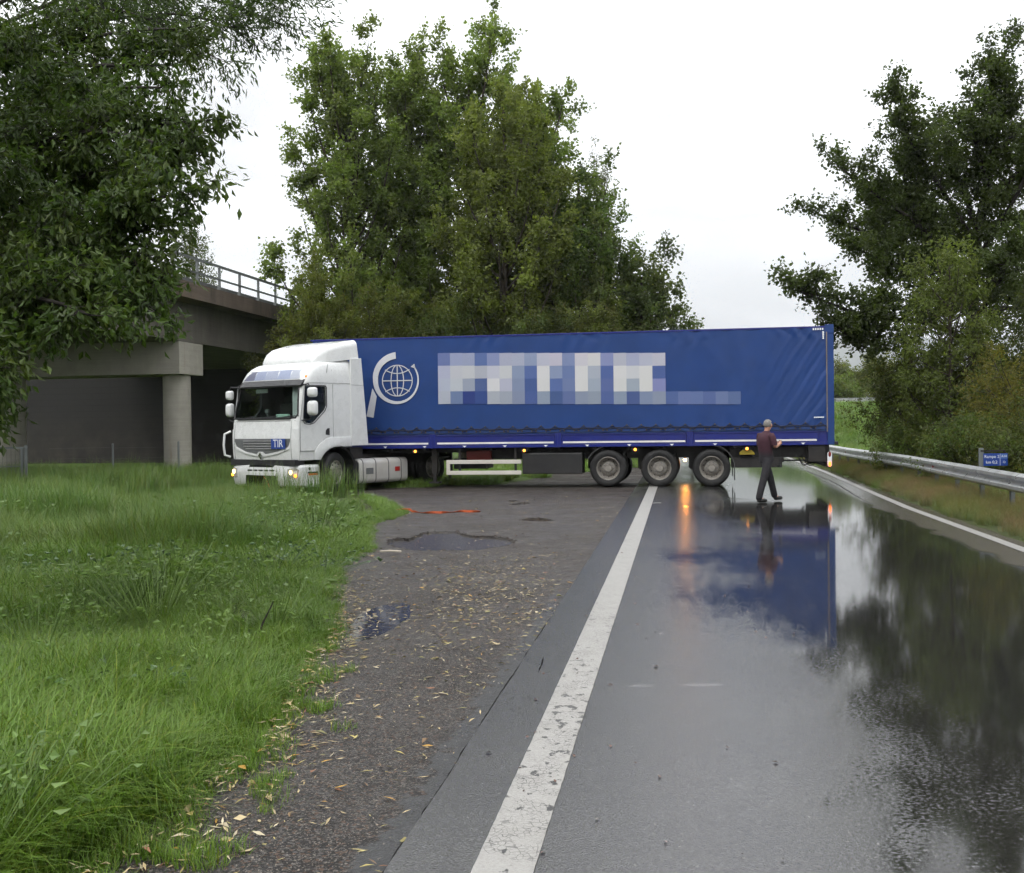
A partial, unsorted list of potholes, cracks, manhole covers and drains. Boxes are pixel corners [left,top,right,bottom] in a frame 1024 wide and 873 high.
pothole [386,530,517,551]
